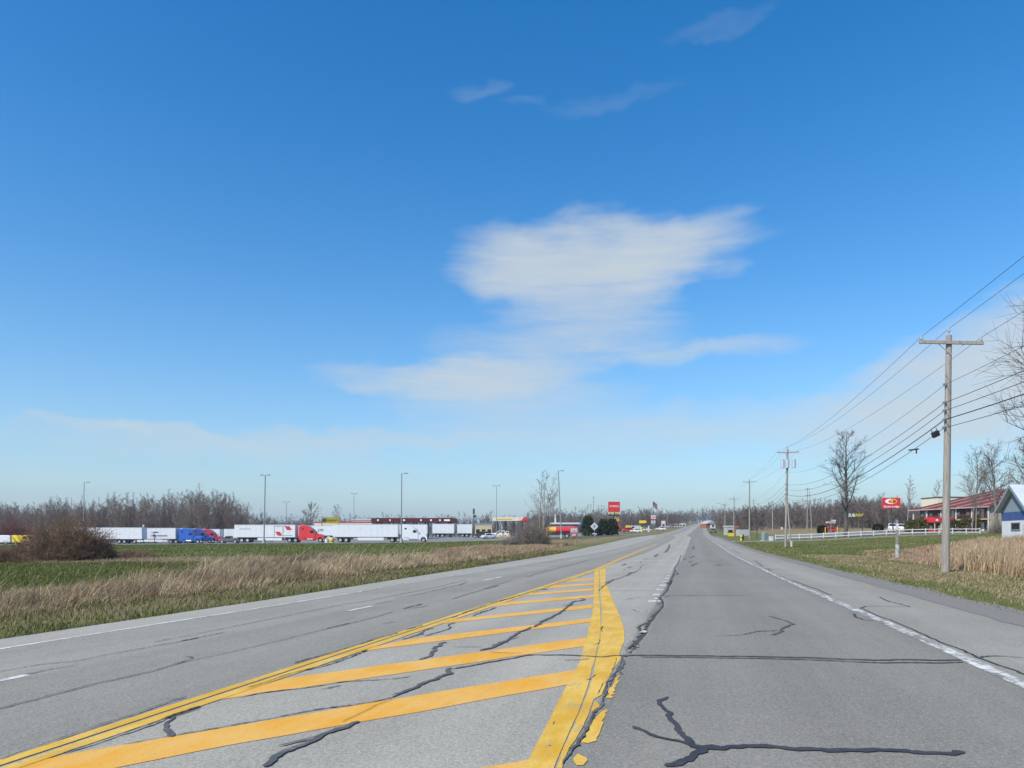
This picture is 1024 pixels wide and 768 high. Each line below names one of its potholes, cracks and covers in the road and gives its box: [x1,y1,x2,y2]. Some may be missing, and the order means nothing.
crack [716,616,794,636]
crack [548,544,698,764]
